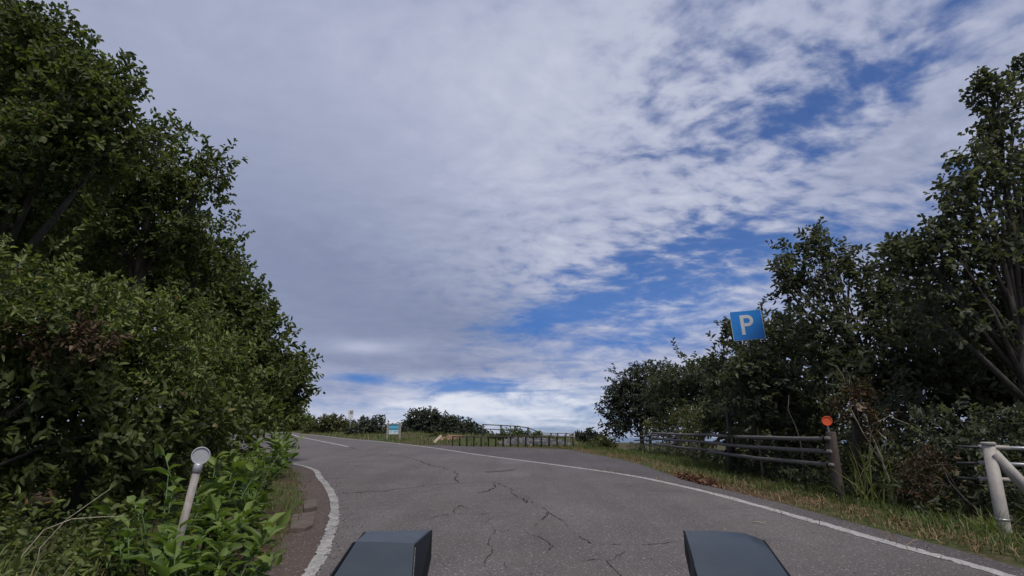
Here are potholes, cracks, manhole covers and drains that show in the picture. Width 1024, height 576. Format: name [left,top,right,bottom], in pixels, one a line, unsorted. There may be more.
crack [355,457,673,576]
